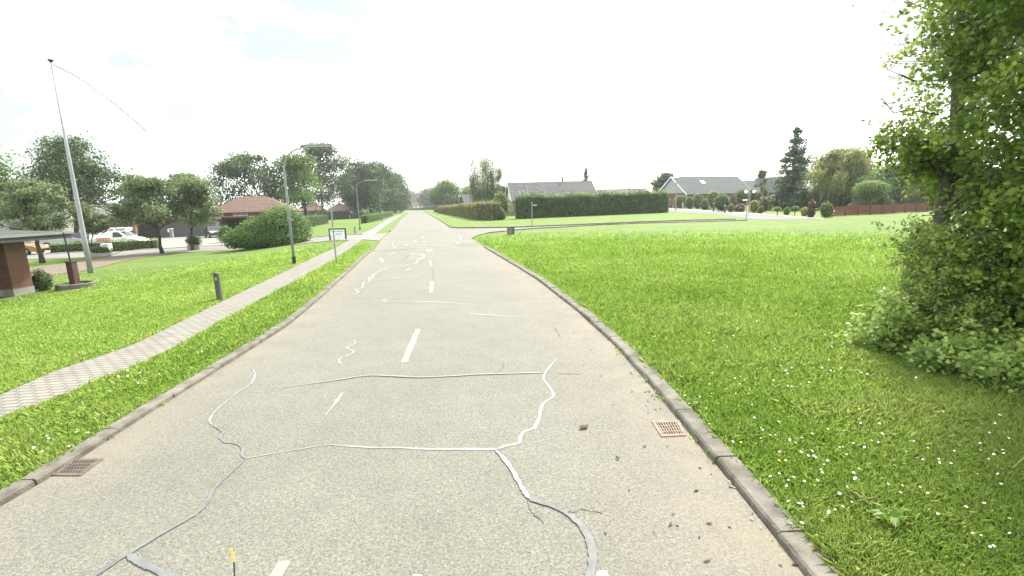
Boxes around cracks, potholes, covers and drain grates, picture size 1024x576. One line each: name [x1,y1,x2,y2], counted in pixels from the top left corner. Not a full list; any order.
drain grate [651,420,686,437]
drain grate [51,458,104,476]
